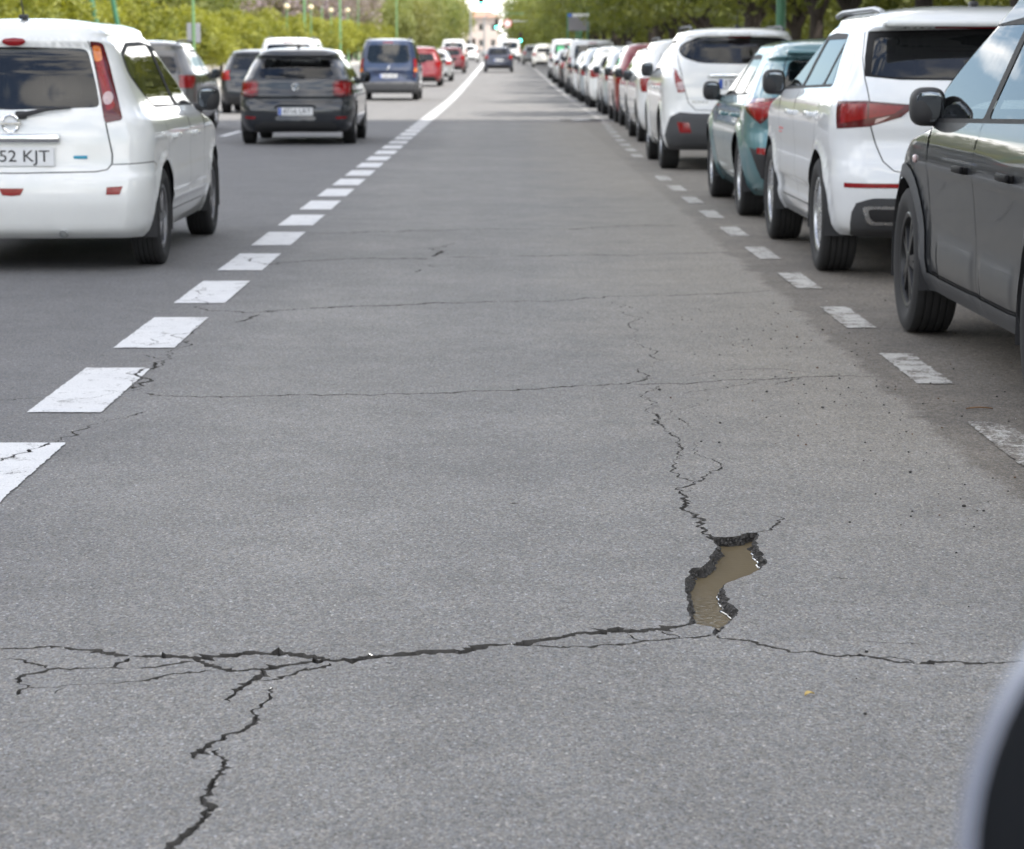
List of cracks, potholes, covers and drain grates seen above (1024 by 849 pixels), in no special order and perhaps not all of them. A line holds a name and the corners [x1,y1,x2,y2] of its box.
pothole [685,532,767,635]
crack [10,326,867,458]
crack [194,291,764,322]
crack [613,303,723,540]
crack [0,625,1016,849]
crack [248,225,728,272]
